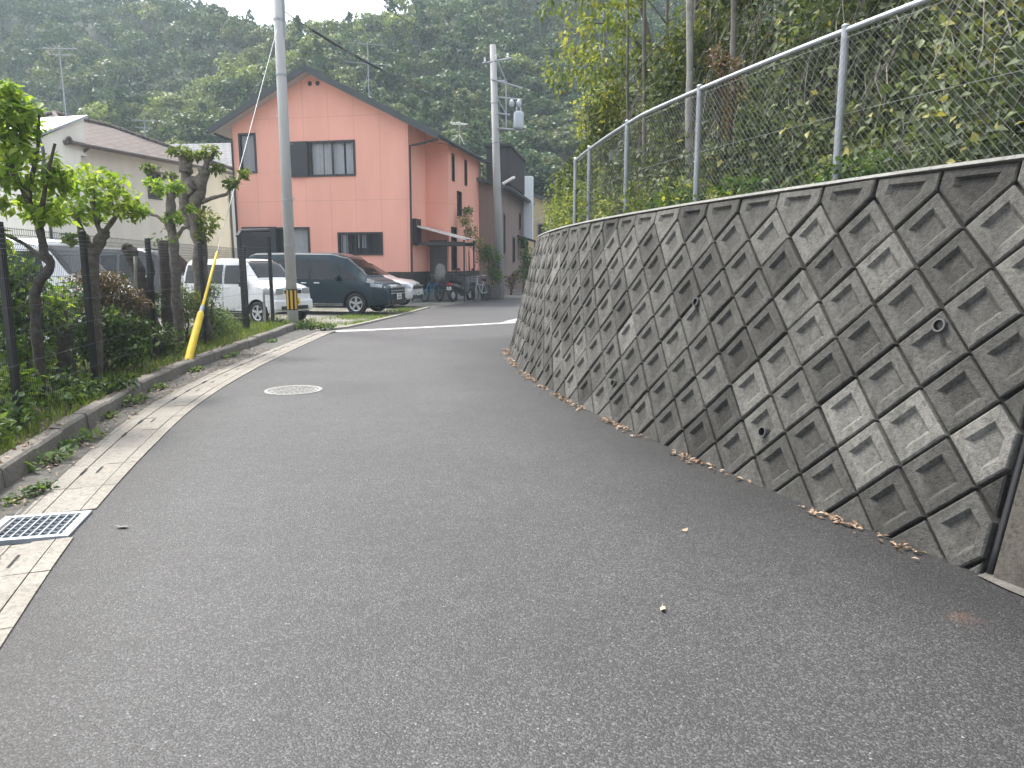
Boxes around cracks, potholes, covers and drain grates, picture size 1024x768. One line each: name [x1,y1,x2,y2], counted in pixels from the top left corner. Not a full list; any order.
drain grate [0,510,93,546]
manhole cover [264,385,323,395]
